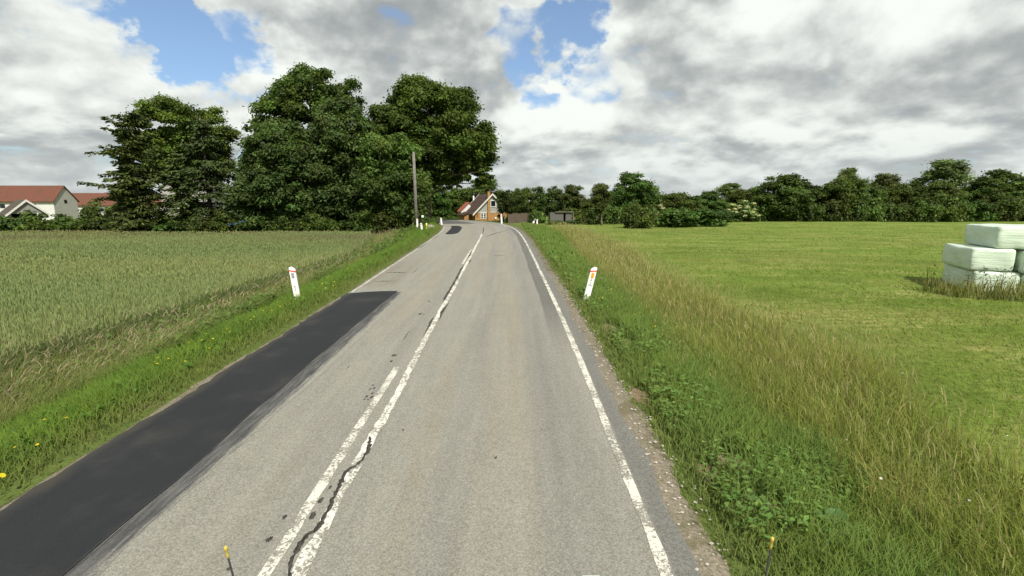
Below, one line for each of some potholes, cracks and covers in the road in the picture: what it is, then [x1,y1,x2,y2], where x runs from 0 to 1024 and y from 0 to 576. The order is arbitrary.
crack [288,436,372,576]
